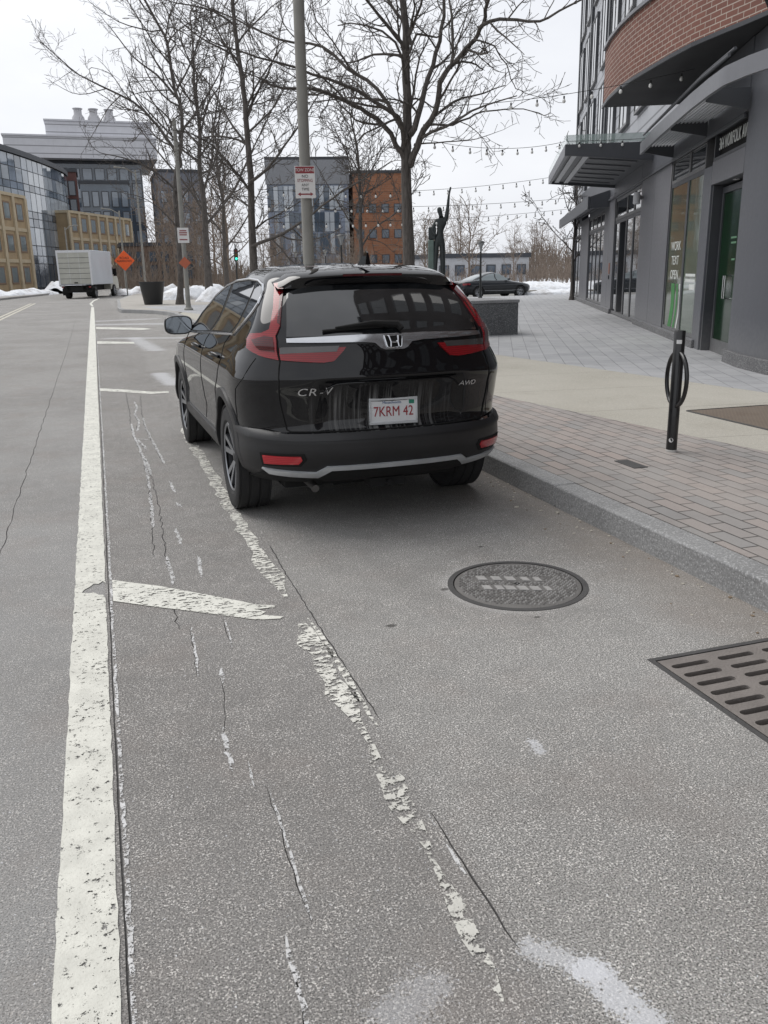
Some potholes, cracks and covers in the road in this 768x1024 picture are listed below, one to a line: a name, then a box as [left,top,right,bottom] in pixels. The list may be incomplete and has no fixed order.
crack [219,668,312,923]
crack [0,327,74,553]
drain grate [647,638,768,743]
manhole cover [447,561,589,611]
crack [127,396,203,677]
